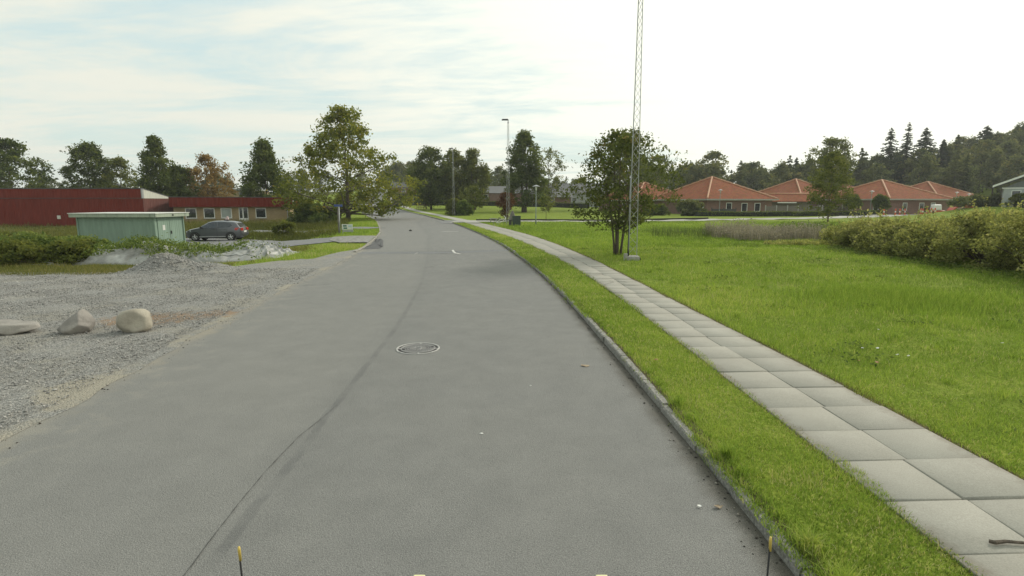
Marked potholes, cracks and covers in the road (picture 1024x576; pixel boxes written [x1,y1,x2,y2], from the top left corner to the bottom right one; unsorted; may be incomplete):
manhole cover [396,343,440,355]
